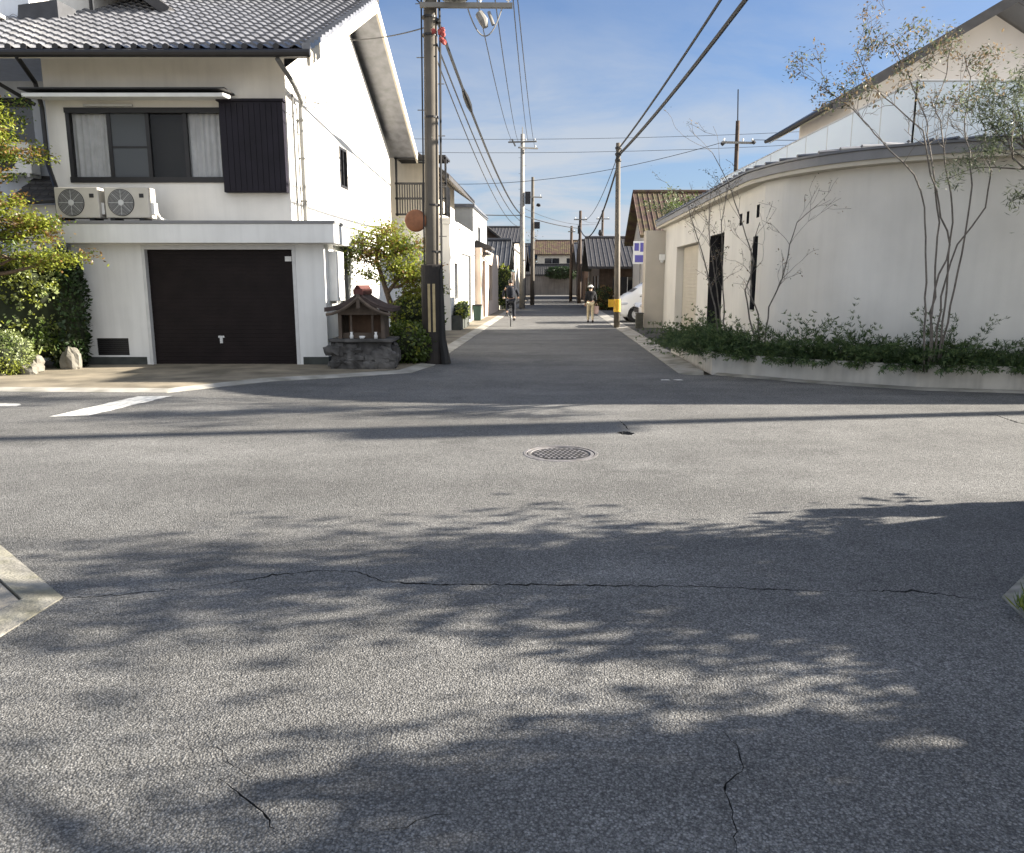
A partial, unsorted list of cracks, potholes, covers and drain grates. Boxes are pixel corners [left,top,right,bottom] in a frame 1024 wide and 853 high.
crack [208,746,276,830]
crack [723,734,756,853]
manhole cover [523,445,598,462]
crack [64,559,981,600]
